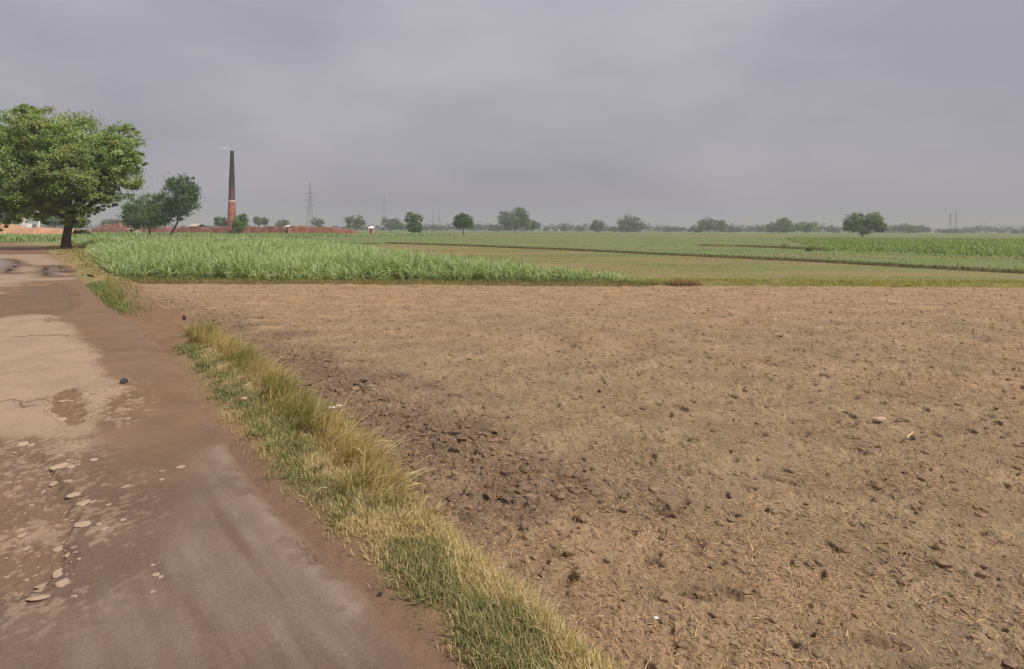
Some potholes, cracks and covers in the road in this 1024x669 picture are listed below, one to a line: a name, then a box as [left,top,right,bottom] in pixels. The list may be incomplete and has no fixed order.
crack [0,398,45,408]
pothole [0,443,87,604]
pothole [43,386,94,426]
